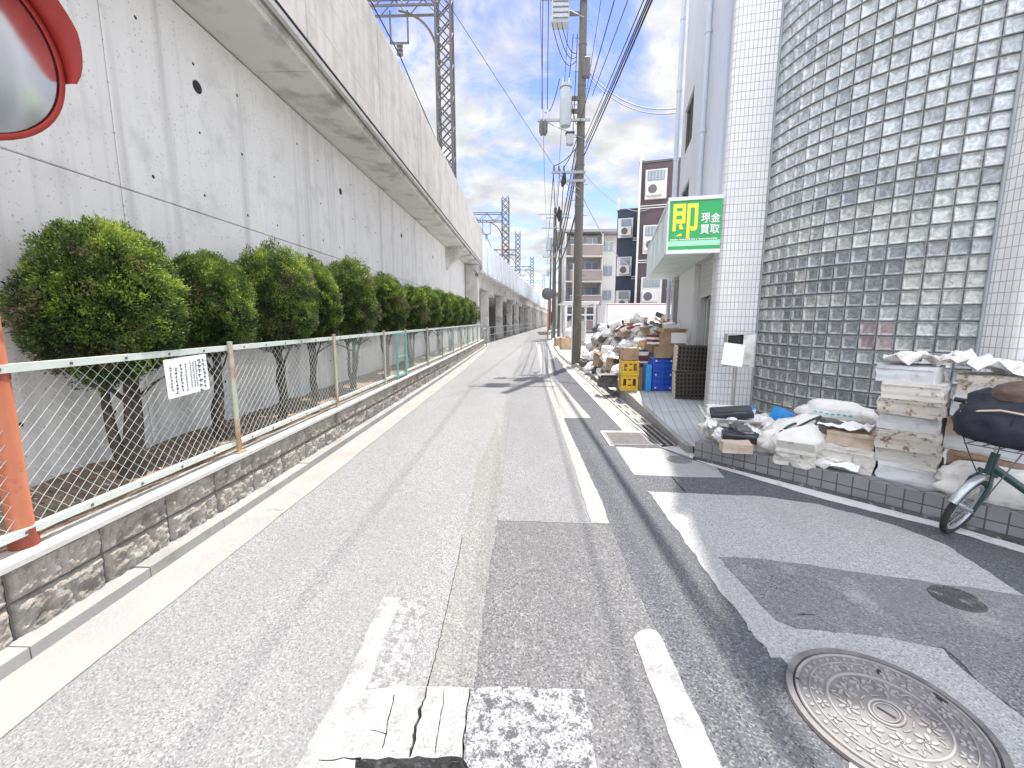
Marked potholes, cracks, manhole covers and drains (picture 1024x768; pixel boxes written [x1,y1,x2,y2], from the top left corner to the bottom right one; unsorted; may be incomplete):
pothole [355,756,468,768]
manhole cover [785,648,1015,768]
drain grate [600,431,655,446]
crack [320,539,462,762]
manhole cover [927,585,988,613]
